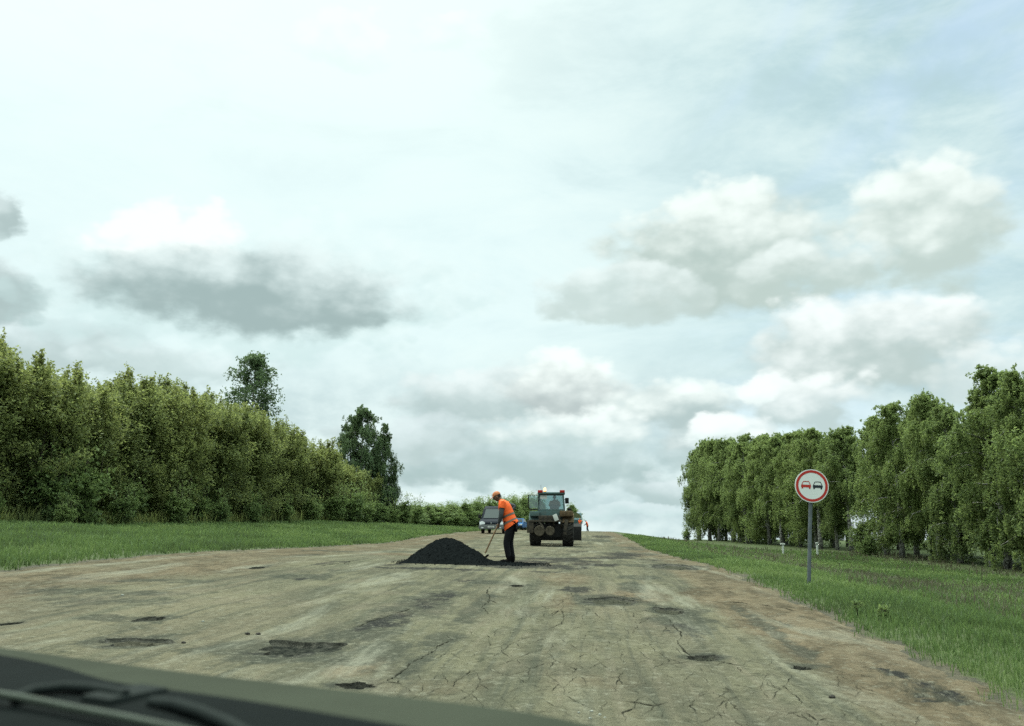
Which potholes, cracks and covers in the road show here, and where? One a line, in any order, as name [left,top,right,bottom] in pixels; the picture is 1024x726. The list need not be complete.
pothole [652,607,684,615]
pothole [260,640,348,657]
crack [396,583,920,726]
pothole [584,597,636,605]
pothole [101,638,175,647]
crack [376,641,448,689]
